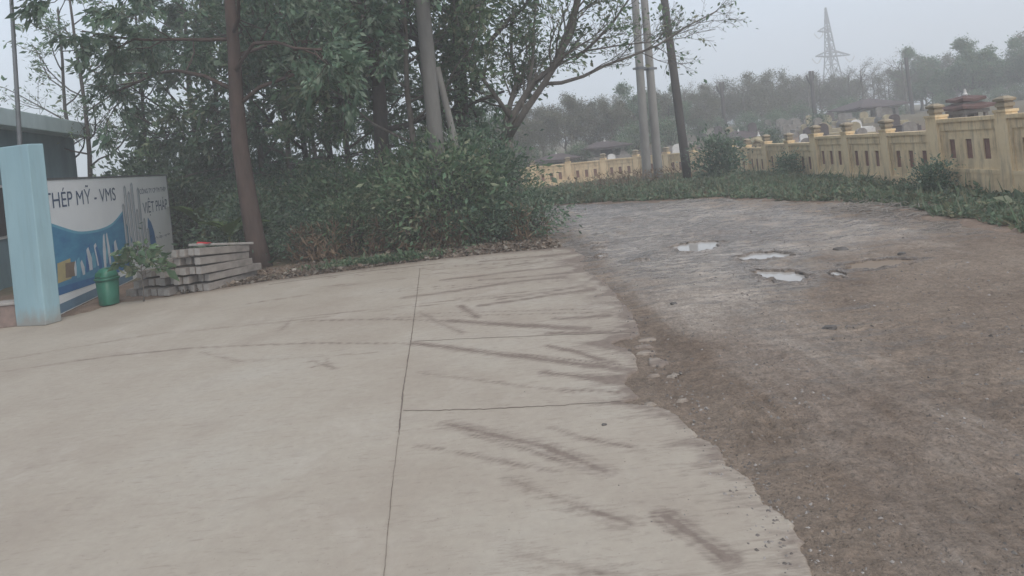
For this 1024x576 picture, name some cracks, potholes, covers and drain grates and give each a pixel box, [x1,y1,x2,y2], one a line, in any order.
pothole [827,270,850,278]
pothole [834,257,933,272]
pothole [745,268,820,285]
pothole [729,250,802,262]
pothole [659,239,733,254]
